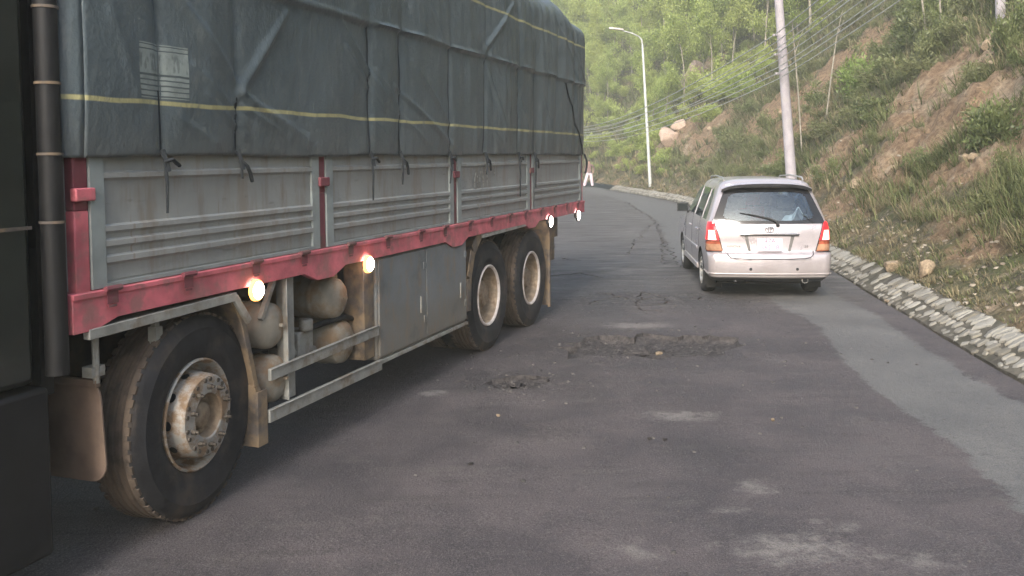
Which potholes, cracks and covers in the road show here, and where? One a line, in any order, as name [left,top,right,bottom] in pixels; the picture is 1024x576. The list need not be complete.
crack [551,258,703,312]
pothole [485,375,552,390]
crack [624,202,681,267]
pothole [555,333,743,360]
